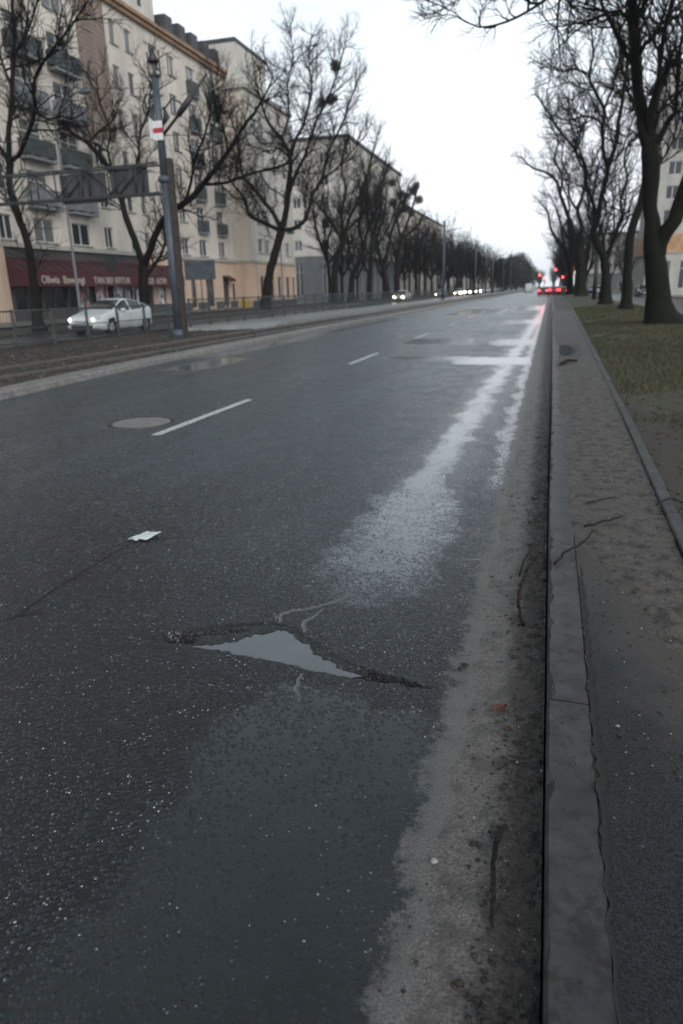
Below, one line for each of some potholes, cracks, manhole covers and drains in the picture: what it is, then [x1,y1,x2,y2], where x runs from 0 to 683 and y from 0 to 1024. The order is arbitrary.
crack [278,596,348,703]
pothole [148,621,445,690]
crack [2,537,213,621]
manhole cover [107,417,175,429]
